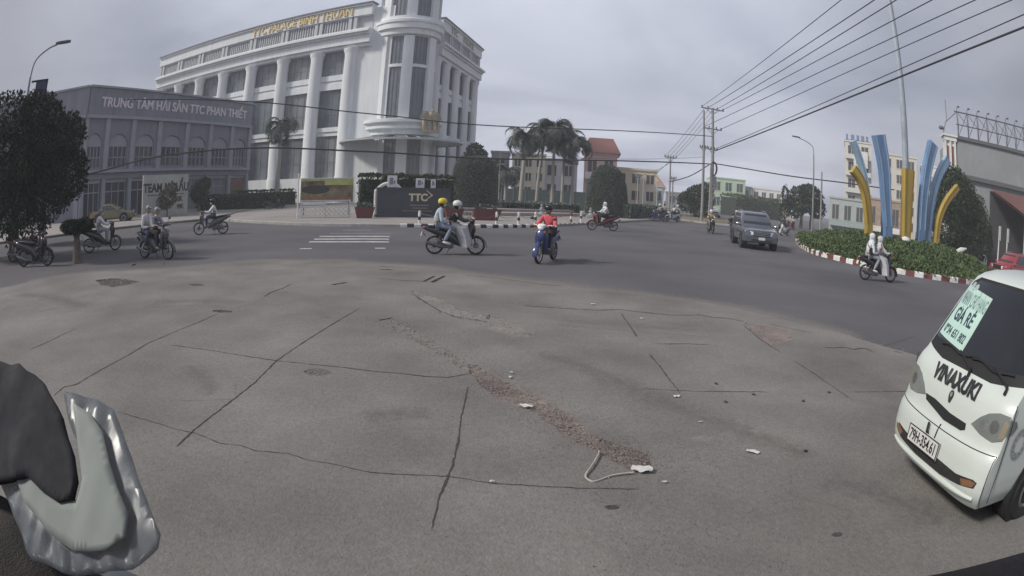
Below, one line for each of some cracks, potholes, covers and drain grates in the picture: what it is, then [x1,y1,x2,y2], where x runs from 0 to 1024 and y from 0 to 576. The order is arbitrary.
pothole [379,318,468,369]
pothole [468,364,652,472]
